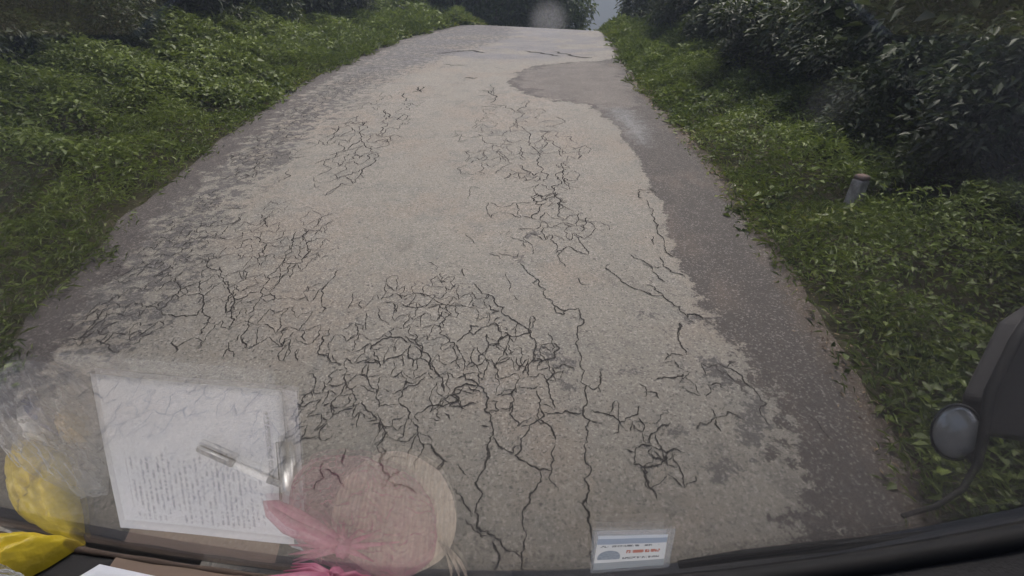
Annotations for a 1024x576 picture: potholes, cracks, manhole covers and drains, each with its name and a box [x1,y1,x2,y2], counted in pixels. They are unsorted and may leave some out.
crack [67,50,770,570]
